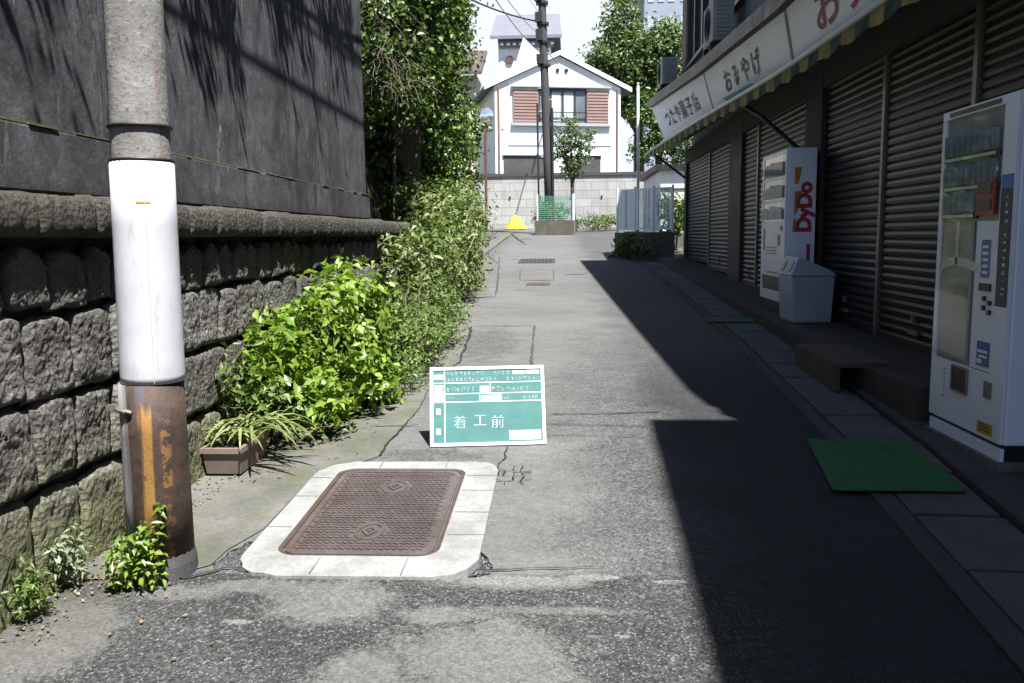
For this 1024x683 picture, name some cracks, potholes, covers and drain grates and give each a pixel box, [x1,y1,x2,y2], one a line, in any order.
crack [453,326,472,367]
crack [496,445,532,484]
manhole cover [240,461,499,581]
crack [379,389,429,456]
